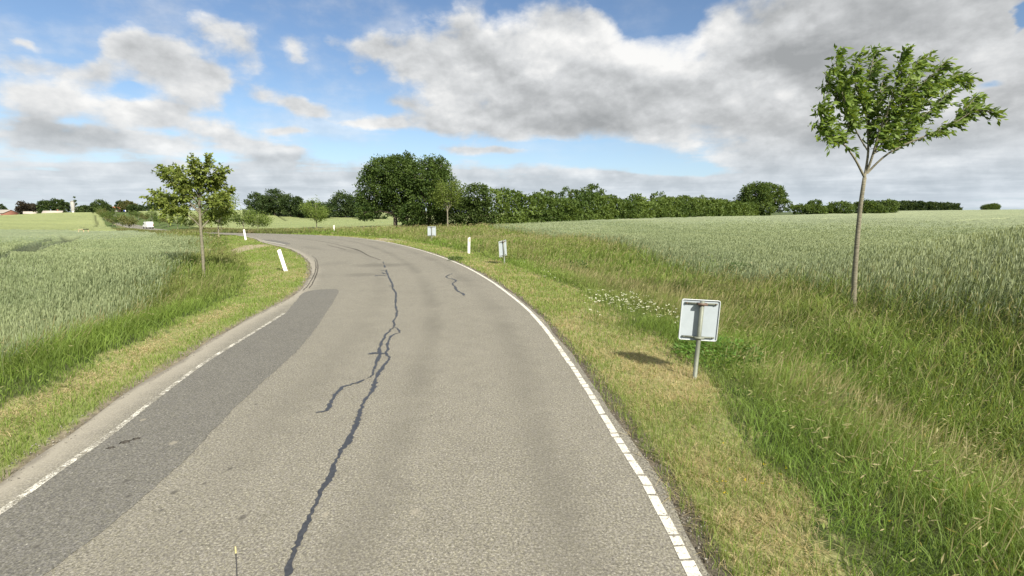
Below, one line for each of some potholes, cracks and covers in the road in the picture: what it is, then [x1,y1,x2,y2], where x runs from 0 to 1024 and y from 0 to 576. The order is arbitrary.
crack [304,256,318,290]
